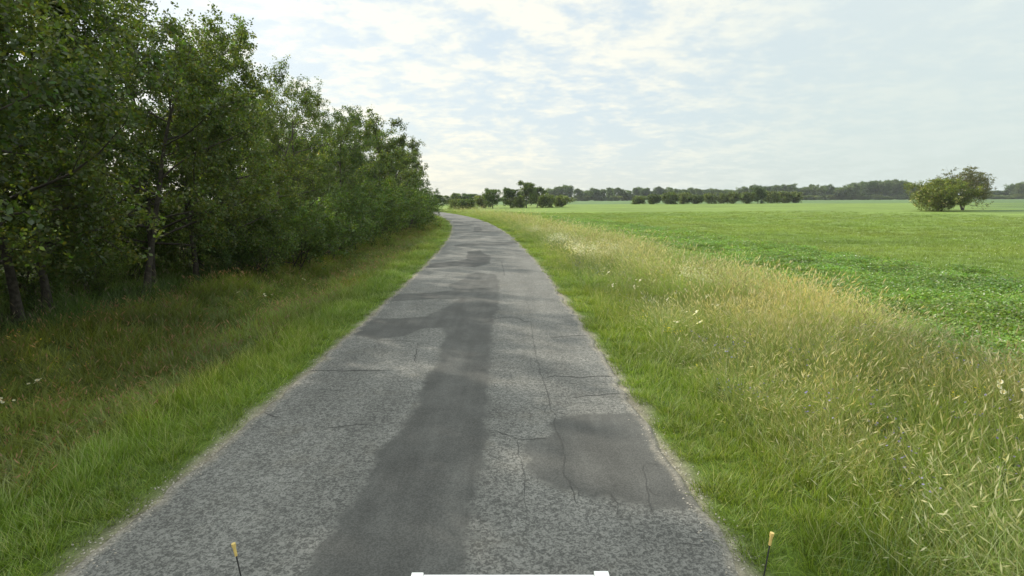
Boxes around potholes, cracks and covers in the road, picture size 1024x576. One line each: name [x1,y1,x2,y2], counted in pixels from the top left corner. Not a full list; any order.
crack [488,298,632,506]
